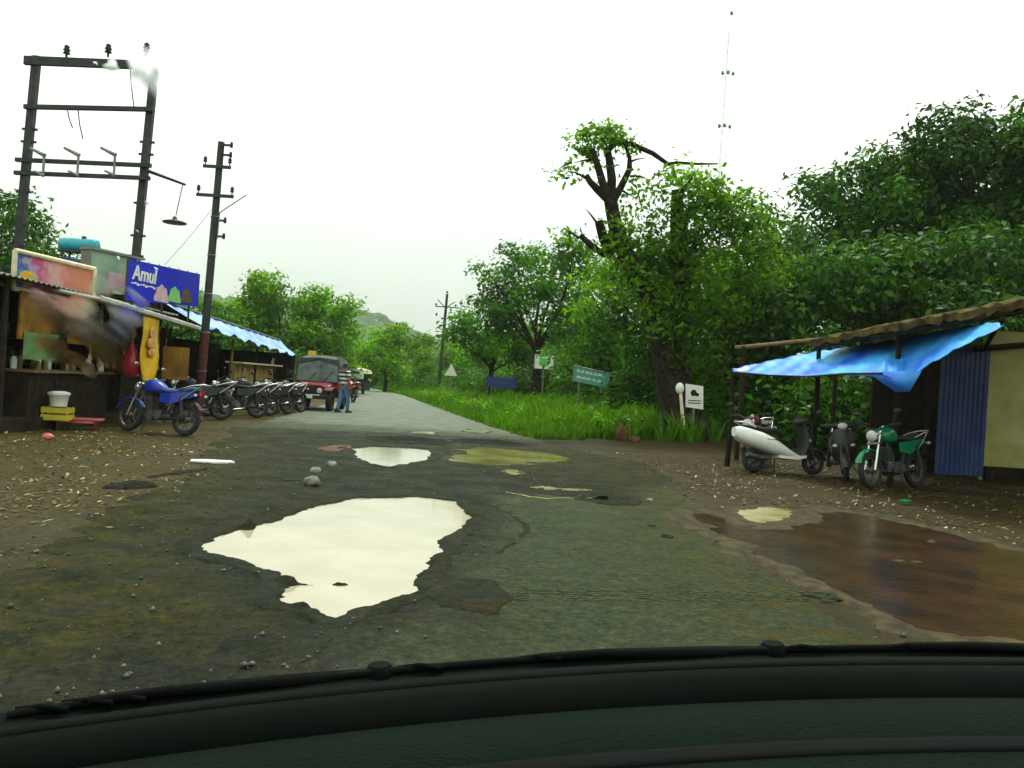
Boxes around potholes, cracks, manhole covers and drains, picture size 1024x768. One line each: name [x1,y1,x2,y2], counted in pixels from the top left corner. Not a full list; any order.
pothole [338,444,445,468]
pothole [429,445,586,468]
pothole [174,494,488,627]
pothole [575,491,644,506]
crack [492,490,608,553]
pothole [662,504,1024,643]
pothole [425,578,514,616]
